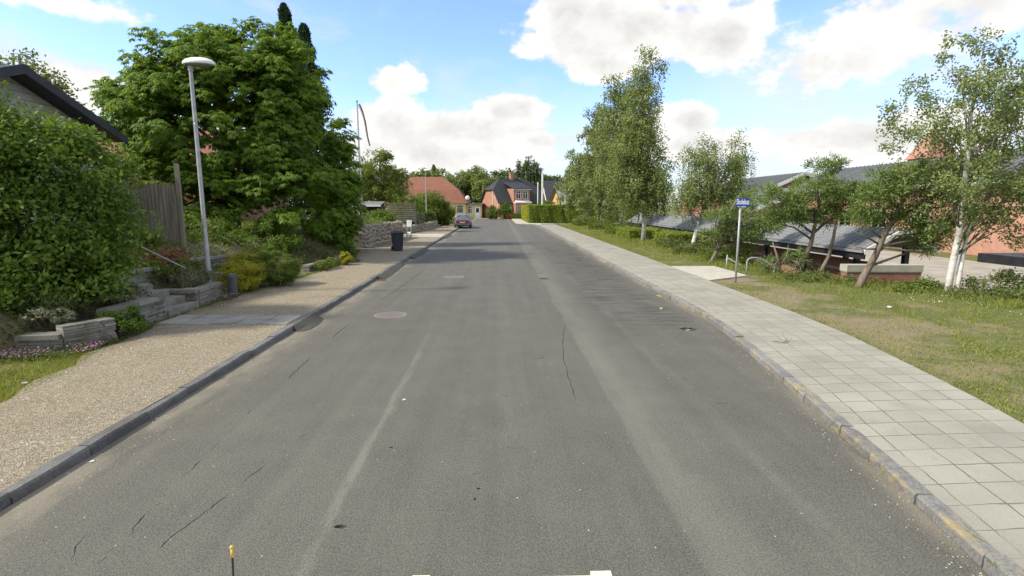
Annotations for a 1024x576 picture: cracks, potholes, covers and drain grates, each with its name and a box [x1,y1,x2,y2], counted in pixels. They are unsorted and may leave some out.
crack [104,270,425,559]
crack [562,328,576,399]
